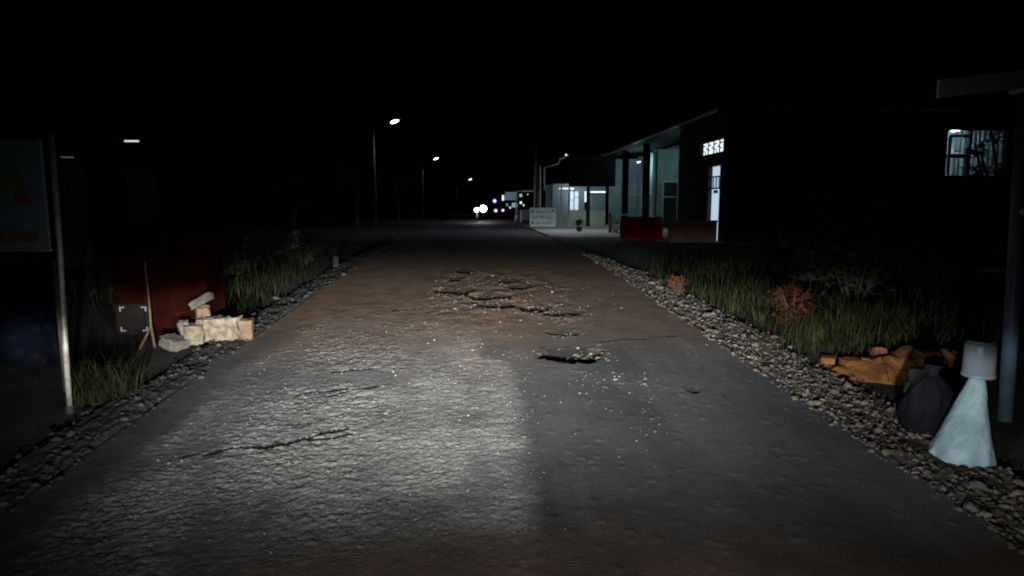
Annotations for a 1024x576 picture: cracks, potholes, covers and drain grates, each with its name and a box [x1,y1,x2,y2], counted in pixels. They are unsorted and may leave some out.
pothole [681,385,704,395]
pothole [532,345,608,365]
pothole [503,282,539,291]
pothole [452,266,480,274]
pothole [467,299,521,311]
pothole [533,306,589,318]
crack [290,366,400,402]
pothole [542,329,584,339]
crack [199,426,357,458]
pothole [457,291,516,301]
pothole [502,302,556,313]
pothole [429,285,480,296]
